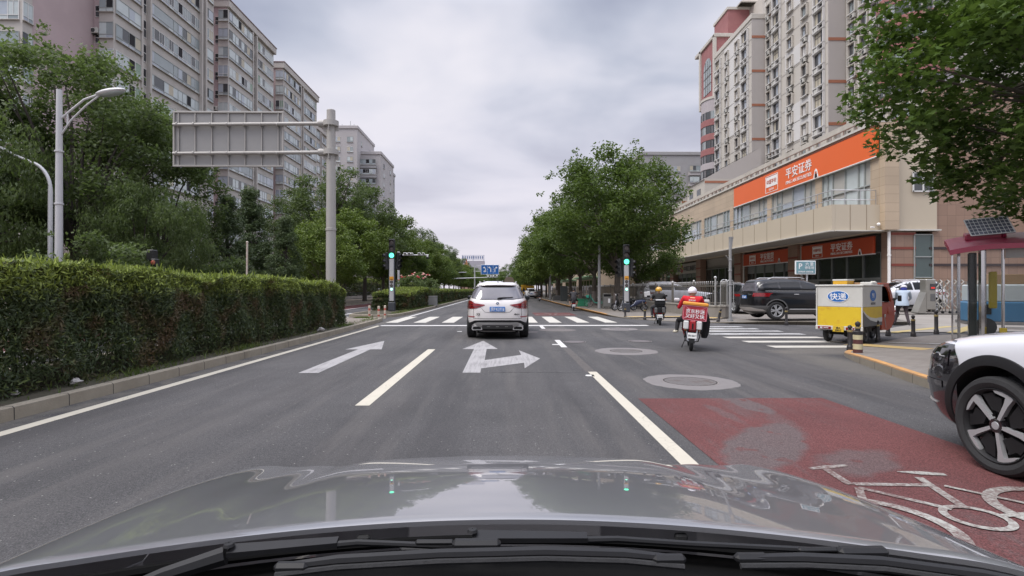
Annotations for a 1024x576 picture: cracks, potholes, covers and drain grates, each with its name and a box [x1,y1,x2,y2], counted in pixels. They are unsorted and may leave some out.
manhole cover [643,374,741,390]
